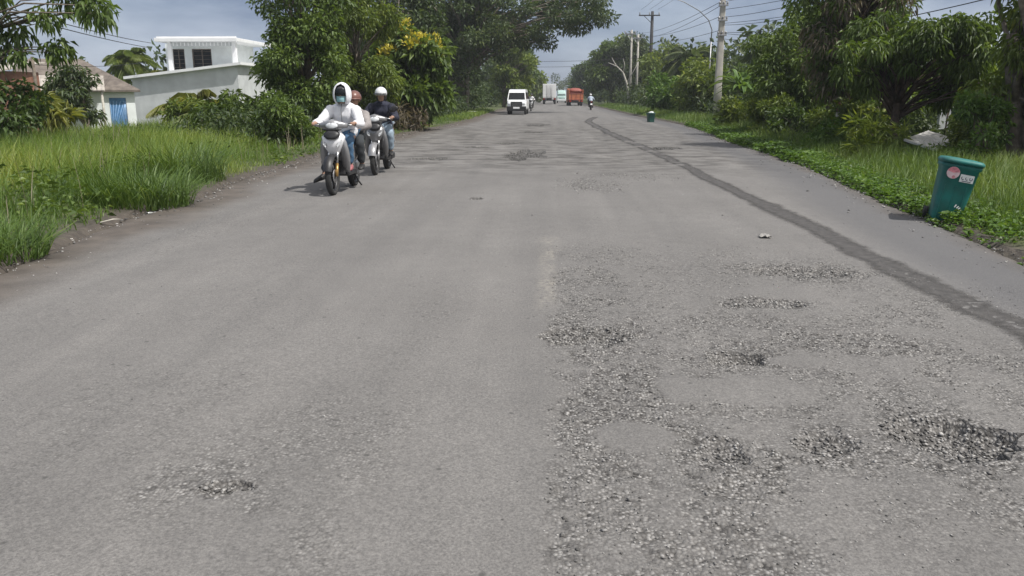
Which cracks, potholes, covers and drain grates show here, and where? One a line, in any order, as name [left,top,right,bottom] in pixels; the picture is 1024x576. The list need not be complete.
pothole [535,325,645,349]
pothole [723,297,812,309]
pothole [744,266,860,279]
pothole [501,148,548,162]
pothole [692,435,753,469]
pothole [788,431,863,459]
pothole [699,350,766,367]
pothole [873,411,1024,465]
pothole [194,479,259,500]
